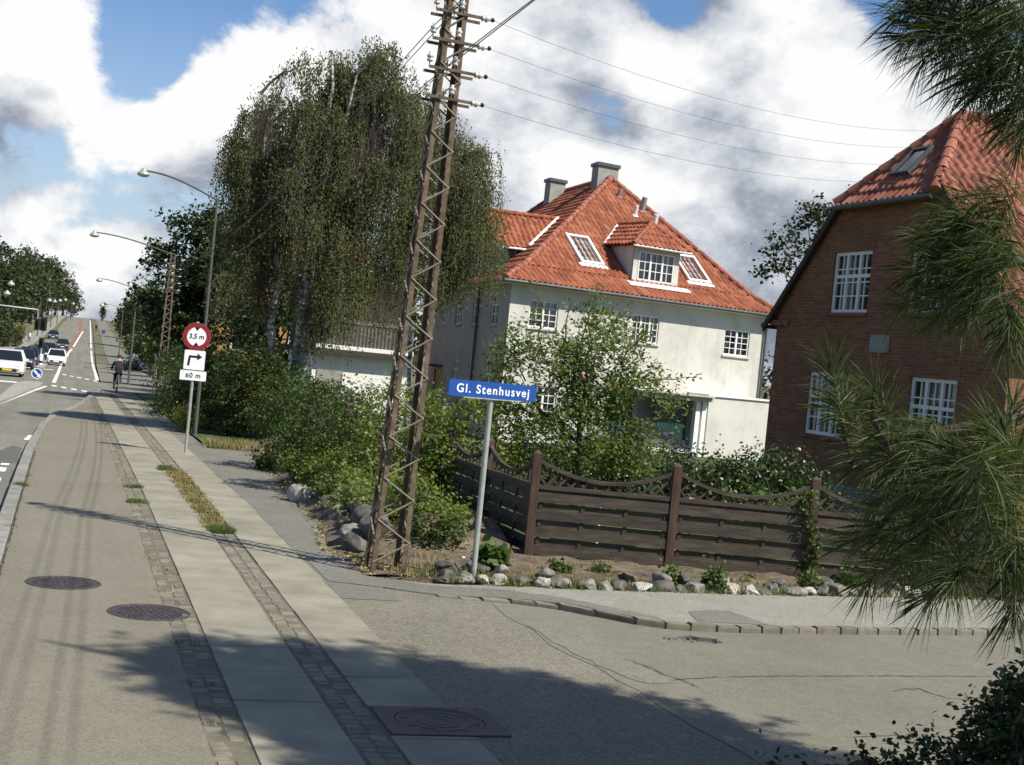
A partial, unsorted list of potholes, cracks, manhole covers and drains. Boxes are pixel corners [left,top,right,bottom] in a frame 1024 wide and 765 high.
crack [626,659,976,701]
manhole cover [25,576,101,590]
manhole cover [107,604,191,621]
manhole cover [371,706,511,738]
pothole [663,635,723,644]
